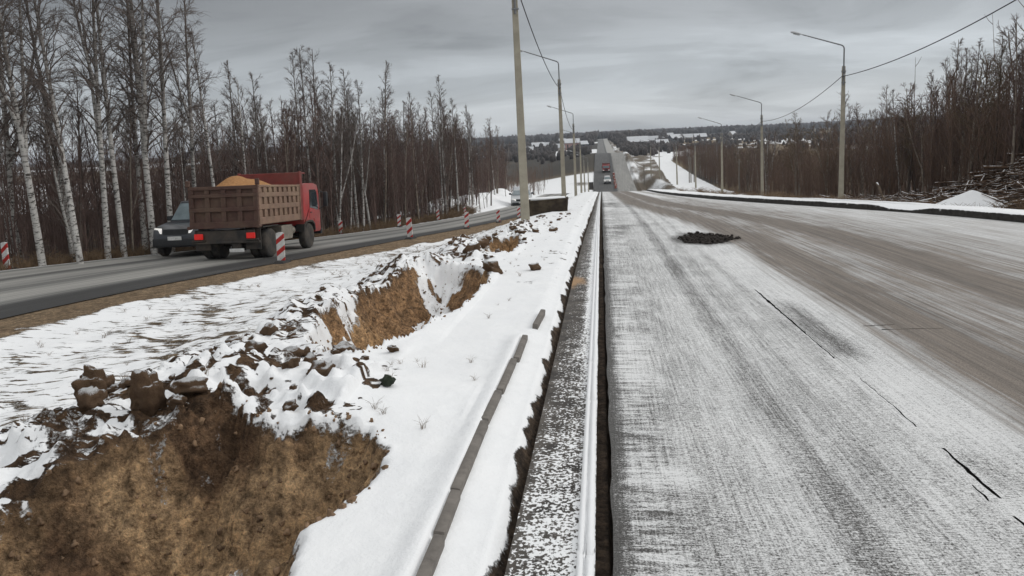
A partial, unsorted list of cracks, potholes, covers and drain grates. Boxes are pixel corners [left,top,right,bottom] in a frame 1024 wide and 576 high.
pothole [677,231,741,244]
crack [860,378,917,427]
crack [942,448,1001,501]
crack [755,290,834,358]
